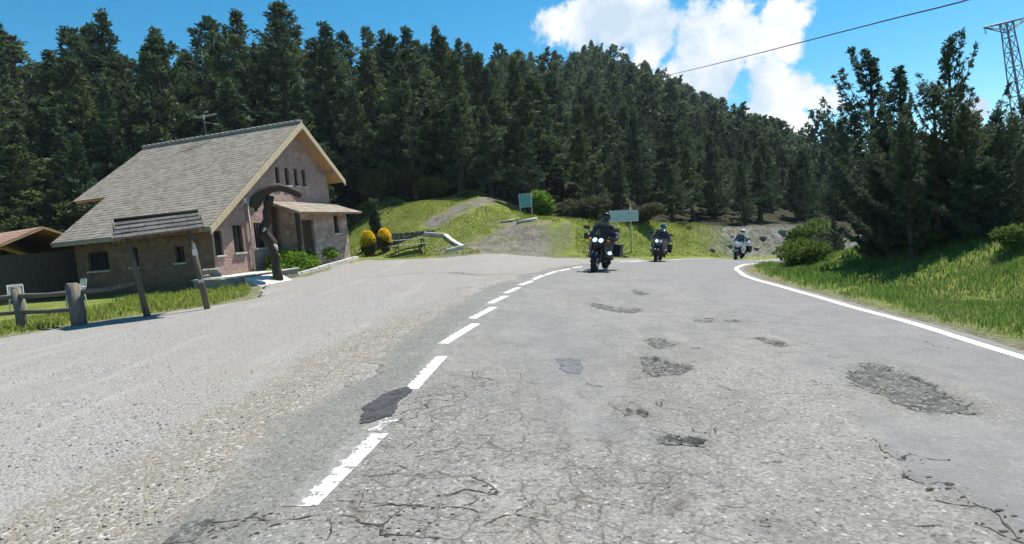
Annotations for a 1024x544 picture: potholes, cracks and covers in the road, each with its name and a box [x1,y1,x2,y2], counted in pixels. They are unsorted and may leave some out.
pothole [640,356,694,377]
pothole [847,363,976,415]
pothole [657,432,708,448]
pothole [645,338,676,349]
pothole [622,408,649,418]
crack [864,438,1024,544]
crack [191,370,560,544]
pothole [591,303,642,313]
